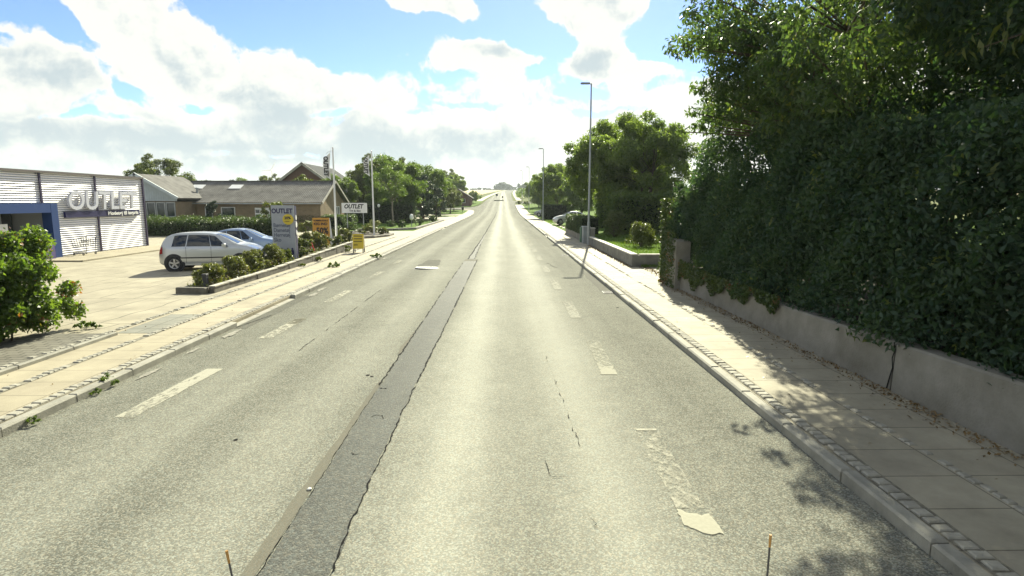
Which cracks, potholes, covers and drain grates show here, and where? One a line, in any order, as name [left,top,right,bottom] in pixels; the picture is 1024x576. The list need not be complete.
crack [256,212,497,576]
